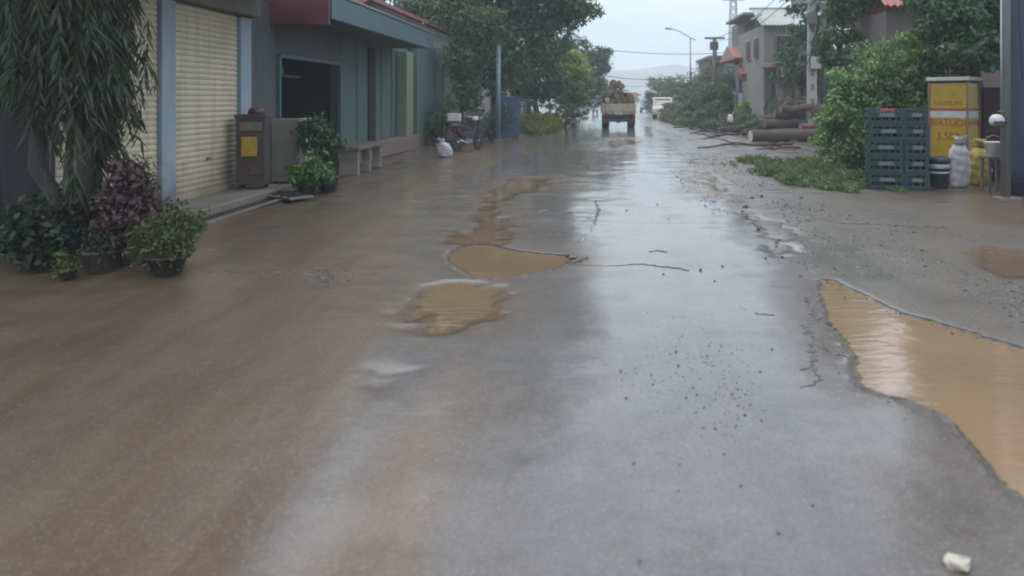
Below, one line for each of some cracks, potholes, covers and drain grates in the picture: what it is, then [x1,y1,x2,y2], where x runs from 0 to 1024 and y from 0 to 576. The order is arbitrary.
crack [572,250,690,271]
pothole [440,244,573,280]
pothole [447,202,513,245]
pothole [976,249,1024,276]
crack [800,298,848,389]
pothole [482,177,550,209]
pothole [404,283,503,335]
pothole [815,279,1024,502]
crack [498,200,601,244]
